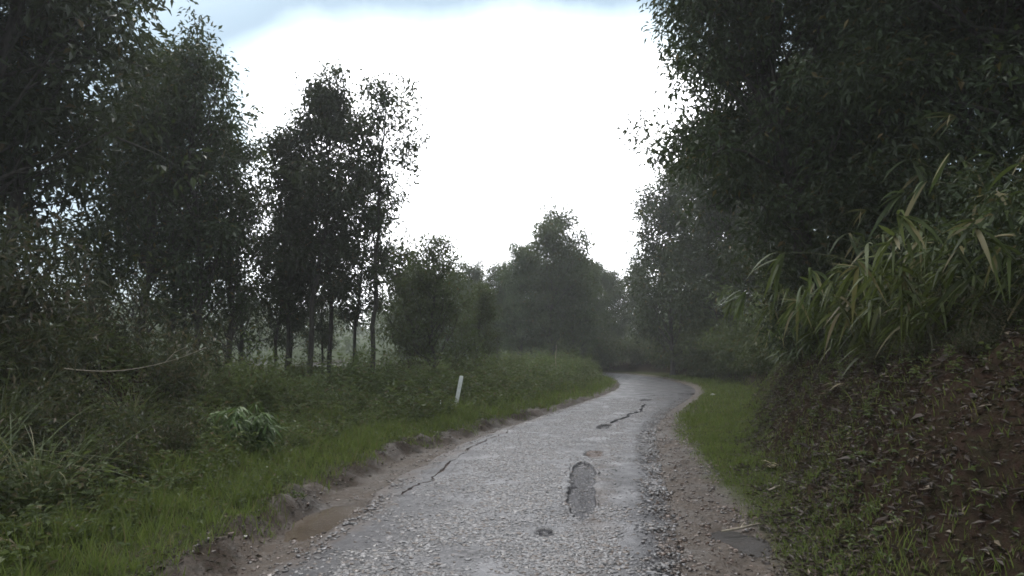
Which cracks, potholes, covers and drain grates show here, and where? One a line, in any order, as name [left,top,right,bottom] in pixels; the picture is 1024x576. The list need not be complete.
pothole [559,460,605,524]
crack [609,393,696,424]
pothole [576,449,612,459]
crack [390,427,519,496]
pothole [525,525,566,541]
